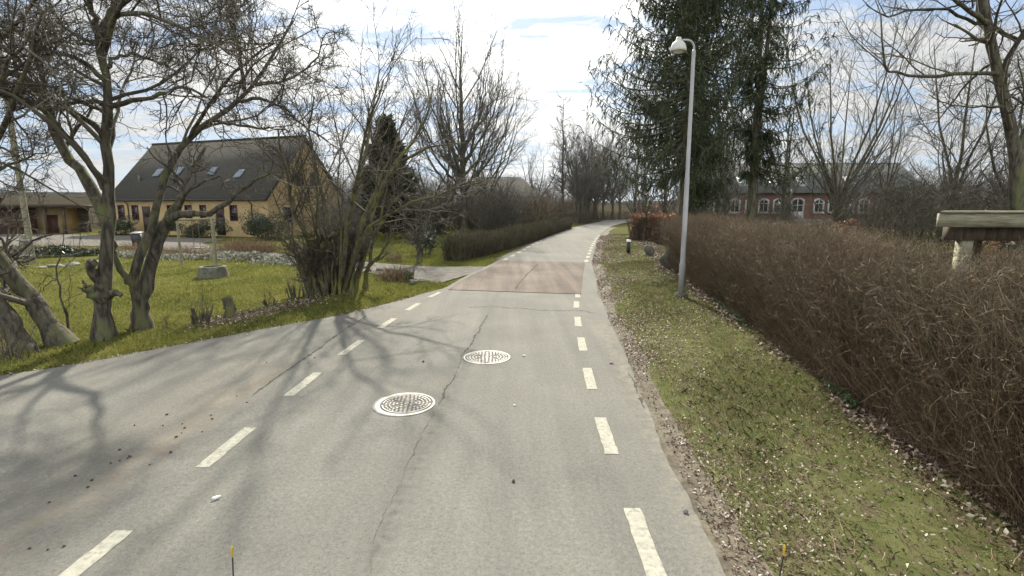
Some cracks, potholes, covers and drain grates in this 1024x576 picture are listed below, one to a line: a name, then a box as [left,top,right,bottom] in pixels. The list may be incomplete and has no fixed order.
crack [370,306,591,573]
manhole cover [463,350,511,365]
manhole cover [372,393,435,417]
crack [628,373,645,408]
